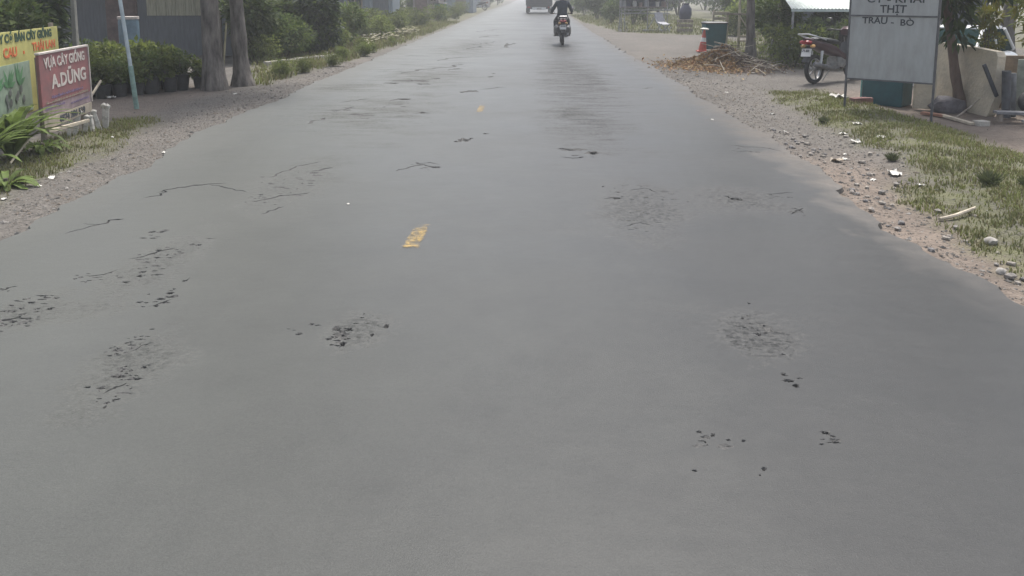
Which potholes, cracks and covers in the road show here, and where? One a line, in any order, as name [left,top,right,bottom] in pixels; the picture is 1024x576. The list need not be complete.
pothole [820,431,843,445]
crack [145,162,328,214]
pothole [692,430,746,450]
